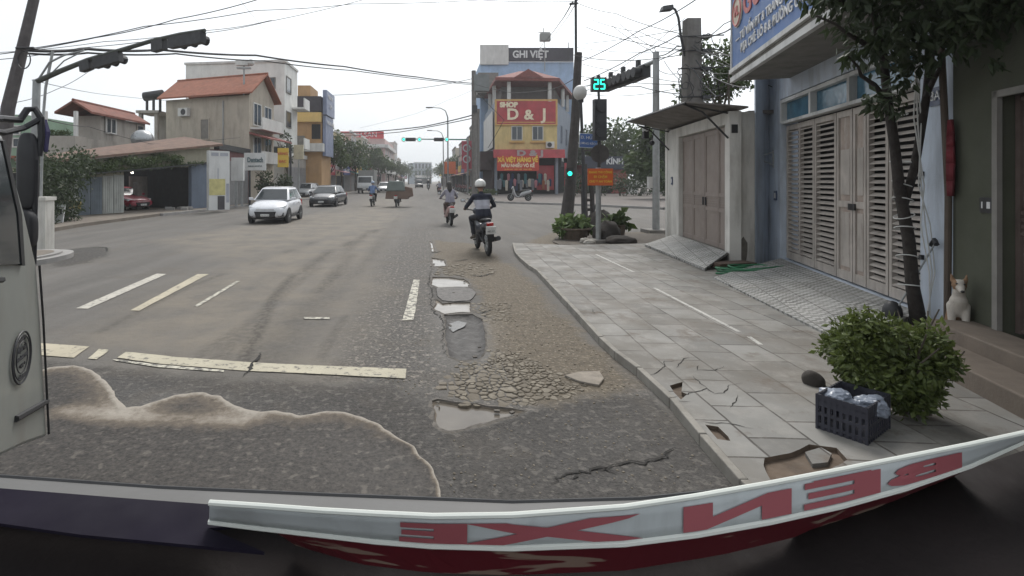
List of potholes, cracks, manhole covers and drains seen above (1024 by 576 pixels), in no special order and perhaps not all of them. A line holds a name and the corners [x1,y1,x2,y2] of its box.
pothole [428,398,528,434]
crack [244,352,261,375]
crack [551,447,675,484]
pothole [443,314,488,362]
